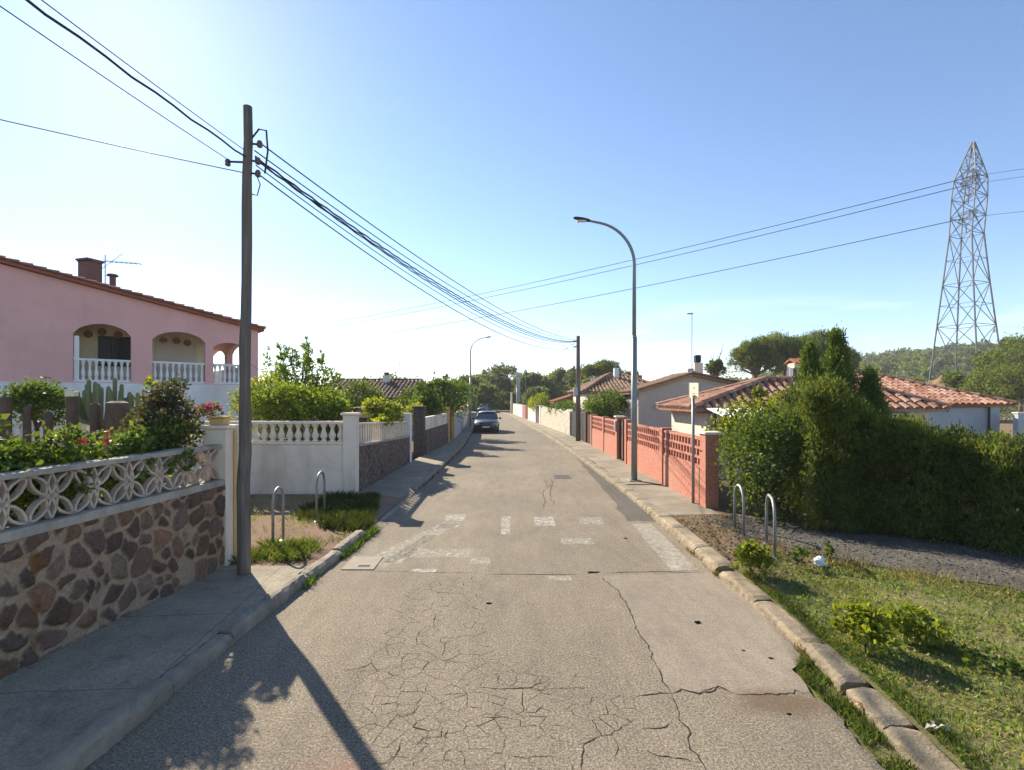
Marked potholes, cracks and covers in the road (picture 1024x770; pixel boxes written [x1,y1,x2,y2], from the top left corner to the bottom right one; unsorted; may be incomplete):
crack [335,576,674,770]
